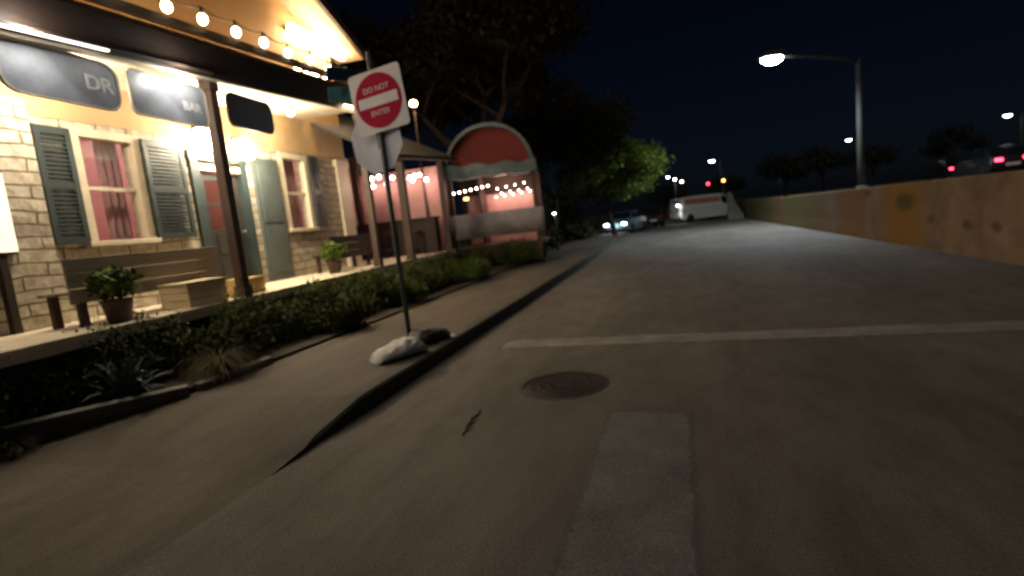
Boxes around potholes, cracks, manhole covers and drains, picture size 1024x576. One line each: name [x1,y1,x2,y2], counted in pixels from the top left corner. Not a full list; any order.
manhole cover [519,371,609,400]
crack [462,410,482,437]
